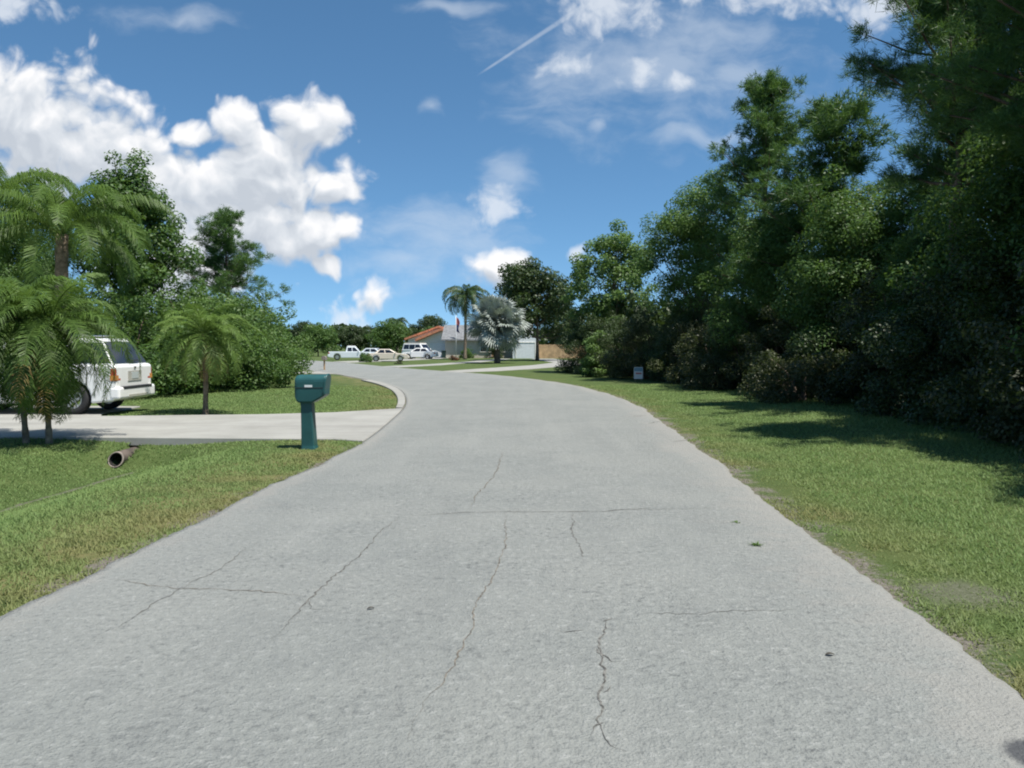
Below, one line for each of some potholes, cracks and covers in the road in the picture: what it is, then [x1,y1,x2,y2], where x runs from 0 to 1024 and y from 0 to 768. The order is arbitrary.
crack [104,457,721,737]
